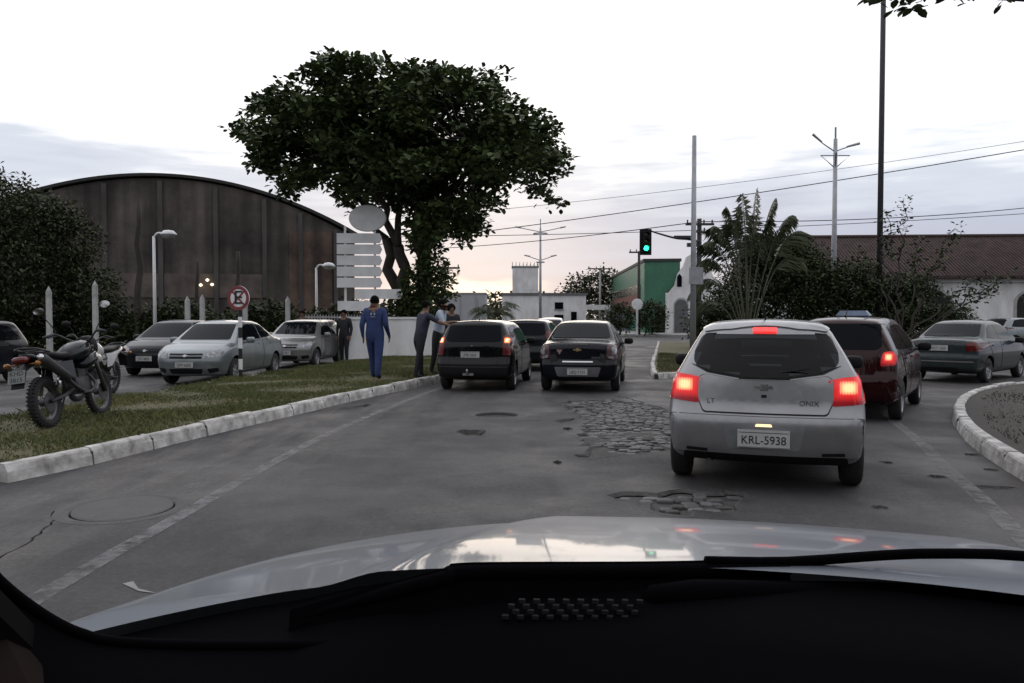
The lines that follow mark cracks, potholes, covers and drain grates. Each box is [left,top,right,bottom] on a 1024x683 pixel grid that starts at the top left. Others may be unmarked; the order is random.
crack [0,511,55,558]
manhole cover [51,494,190,525]
pothole [601,488,763,517]
pothole [553,399,671,459]
